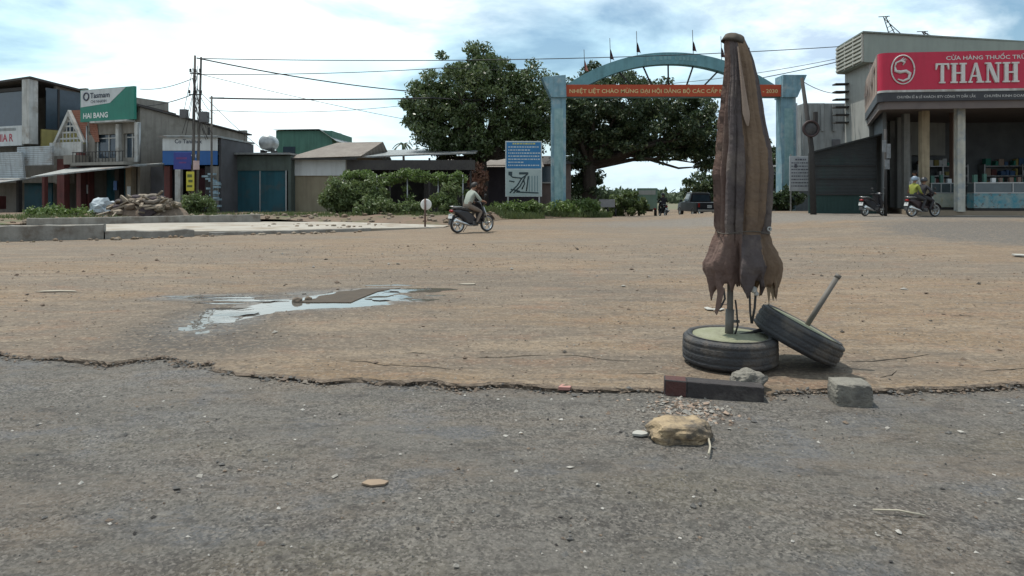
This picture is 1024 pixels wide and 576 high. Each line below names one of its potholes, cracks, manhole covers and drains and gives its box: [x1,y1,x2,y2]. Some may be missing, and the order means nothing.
pothole [164,284,458,334]
crack [353,352,453,370]
crack [848,354,928,378]
